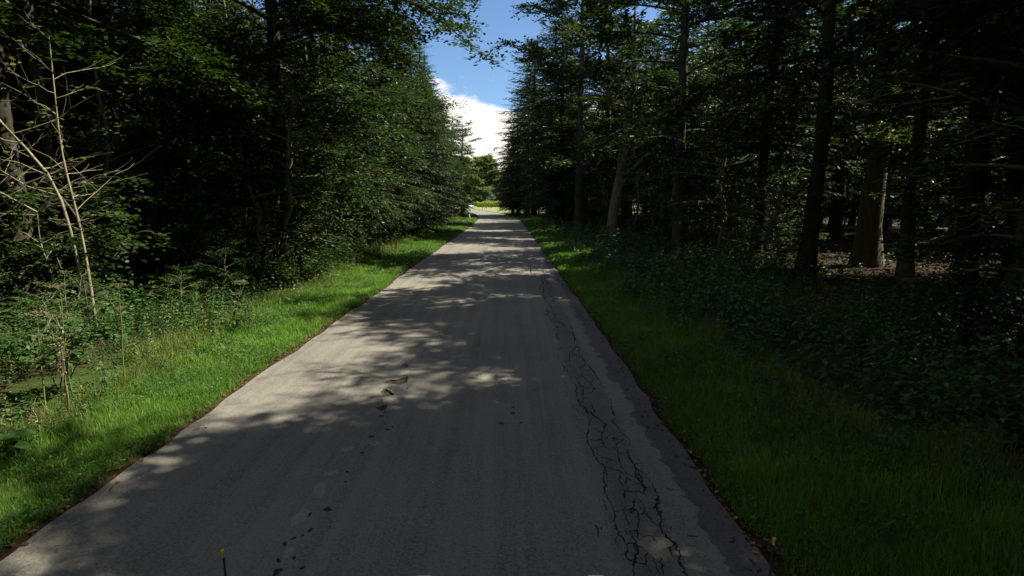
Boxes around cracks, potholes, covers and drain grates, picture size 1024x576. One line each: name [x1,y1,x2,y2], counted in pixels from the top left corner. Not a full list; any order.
crack [530,267,698,576]
pothole [384,376,408,385]
